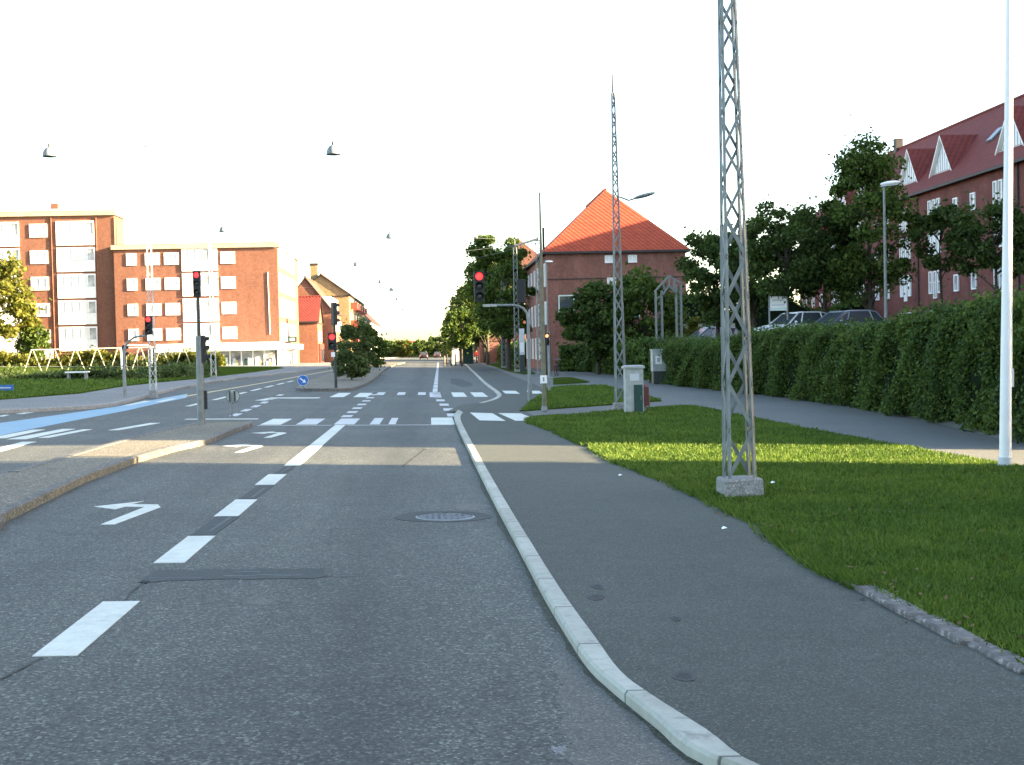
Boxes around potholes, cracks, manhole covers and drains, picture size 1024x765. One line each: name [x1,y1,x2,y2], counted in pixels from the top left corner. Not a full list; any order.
manhole cover [394,511,492,522]
crack [0,657,42,679]
